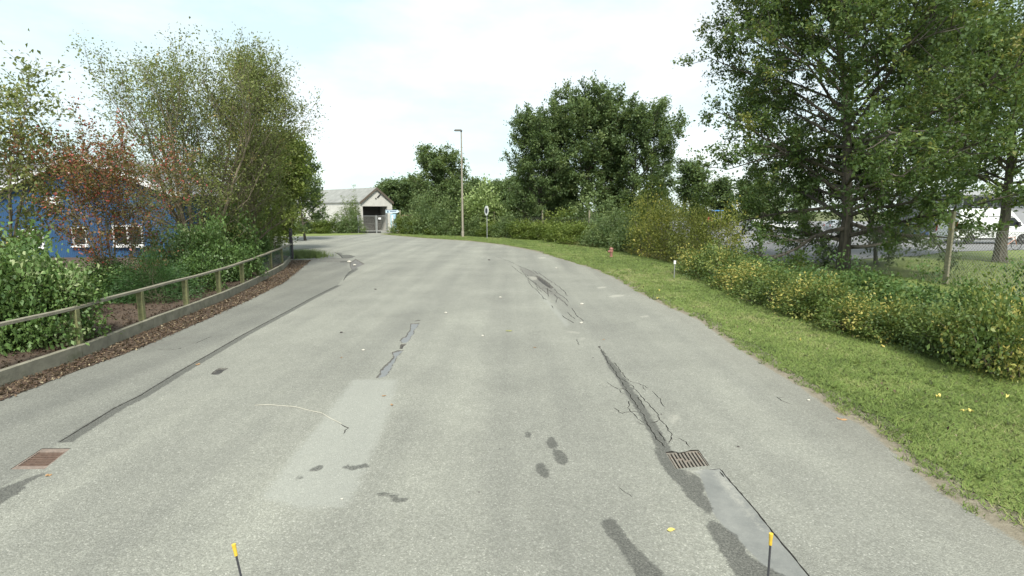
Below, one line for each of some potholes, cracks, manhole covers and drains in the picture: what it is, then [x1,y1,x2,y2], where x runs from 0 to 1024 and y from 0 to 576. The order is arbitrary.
pothole [376,350,403,378]
pothole [400,323,419,343]
crack [576,339,689,447]
crack [498,257,581,323]
drain grate [11,448,70,469]
drain grate [666,450,710,469]
